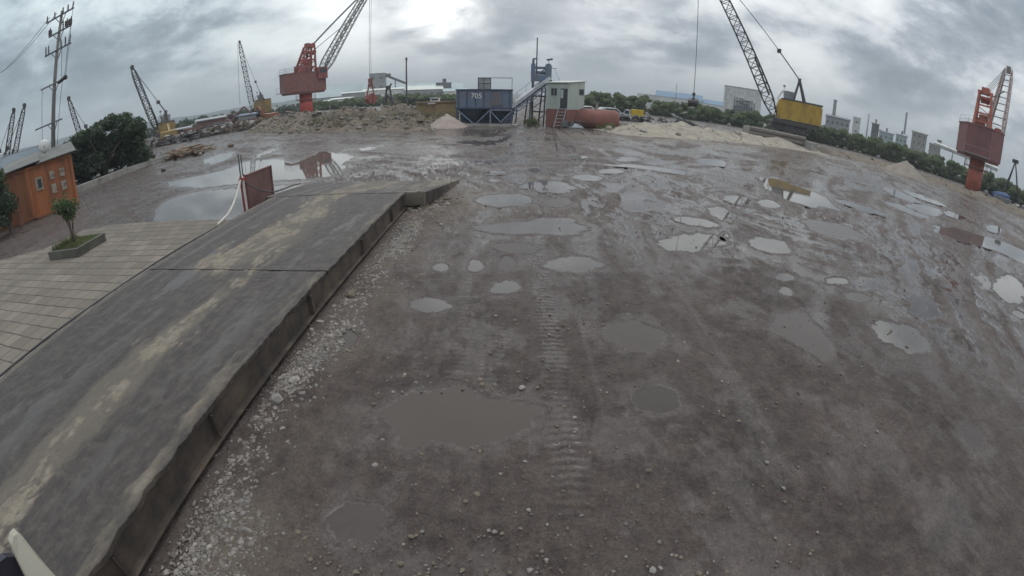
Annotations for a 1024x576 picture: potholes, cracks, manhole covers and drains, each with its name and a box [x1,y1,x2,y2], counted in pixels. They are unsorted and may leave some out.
pothole [318,495,396,549]
pothole [471,193,538,208]
pothole [866,317,938,359]
pothole [625,381,686,417]
pothole [470,217,592,237]
pothole [765,309,839,364]
pothole [537,254,611,275]
pothole [371,380,553,454]
pothole [595,318,671,354]
